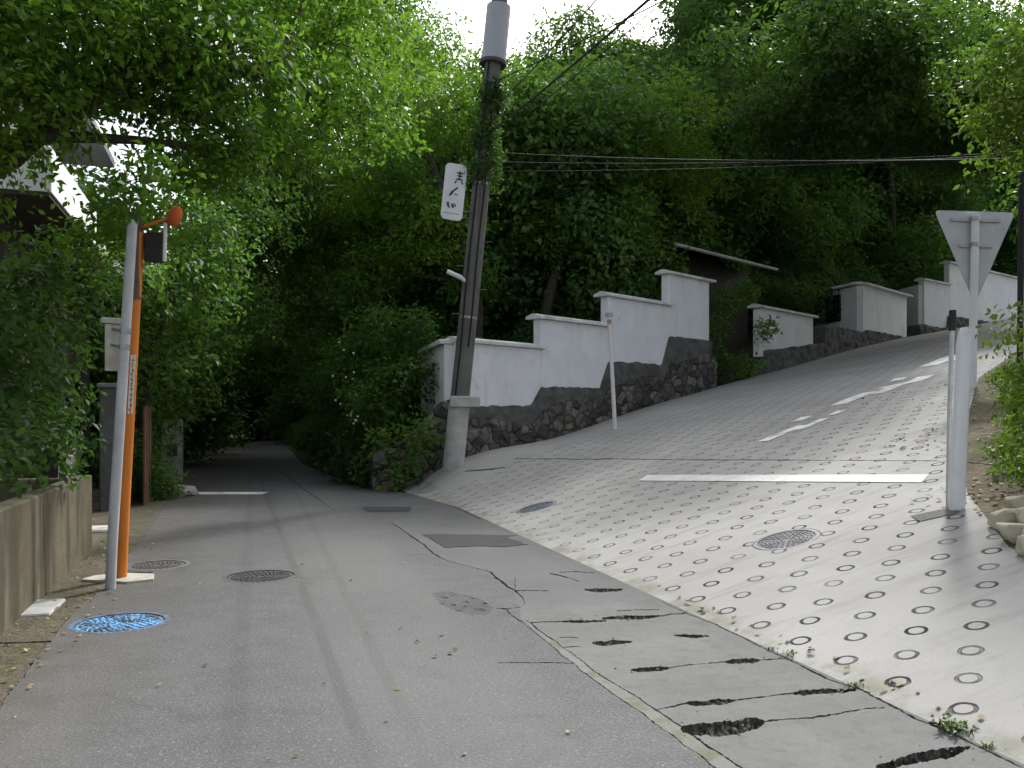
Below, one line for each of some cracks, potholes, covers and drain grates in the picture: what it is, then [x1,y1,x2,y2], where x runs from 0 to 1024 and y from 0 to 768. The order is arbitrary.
manhole cover [127,560,190,570]
pothole [681,717,764,737]
manhole cover [68,612,170,634]
manhole cover [753,529,820,550]
manhole cover [222,569,299,583]
pothole [876,746,970,768]
manhole cover [517,501,556,514]
crack [389,521,885,768]
